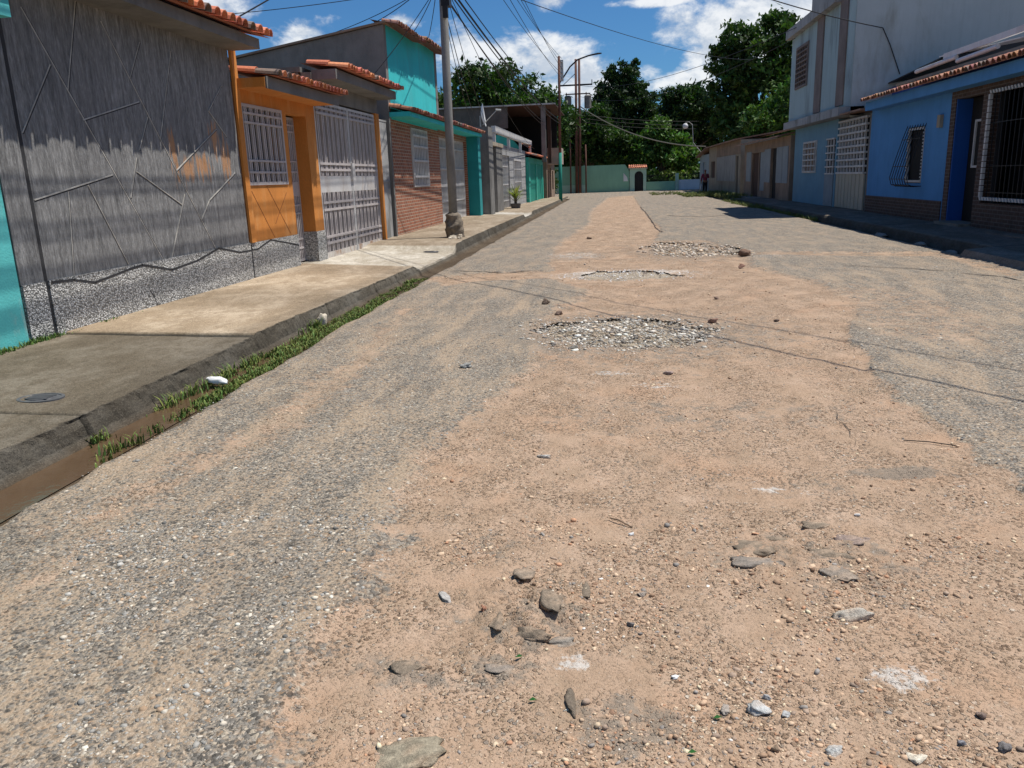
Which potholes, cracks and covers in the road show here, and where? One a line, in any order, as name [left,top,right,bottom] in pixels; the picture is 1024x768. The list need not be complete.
pothole [636,241,755,258]
pothole [563,268,695,282]
manhole cover [16,393,65,403]
pothole [509,314,736,355]
